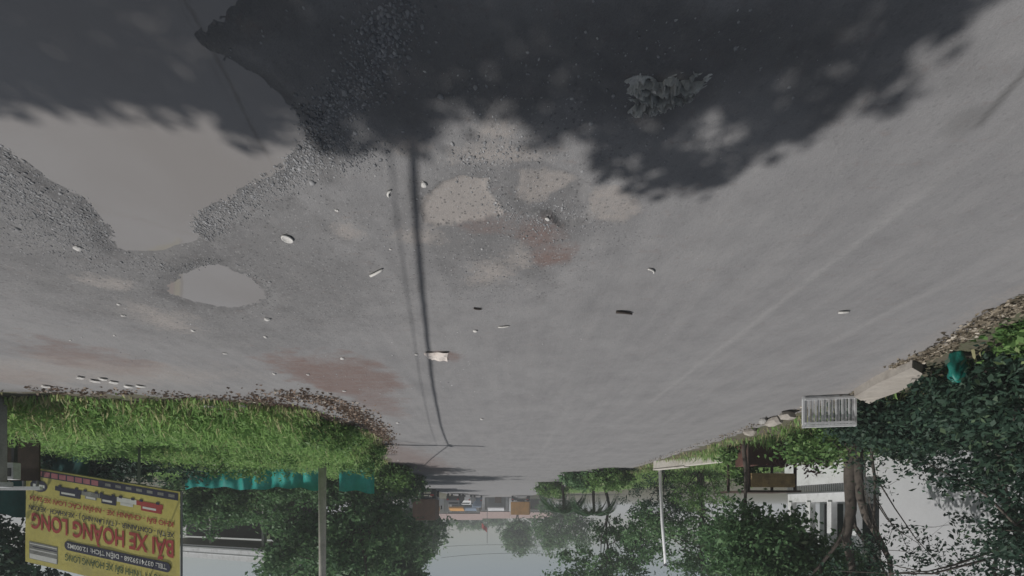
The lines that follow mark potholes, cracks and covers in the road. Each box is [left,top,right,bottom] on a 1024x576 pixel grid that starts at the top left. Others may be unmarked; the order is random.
pothole [0,0,334,271]
pothole [149,258,280,315]
